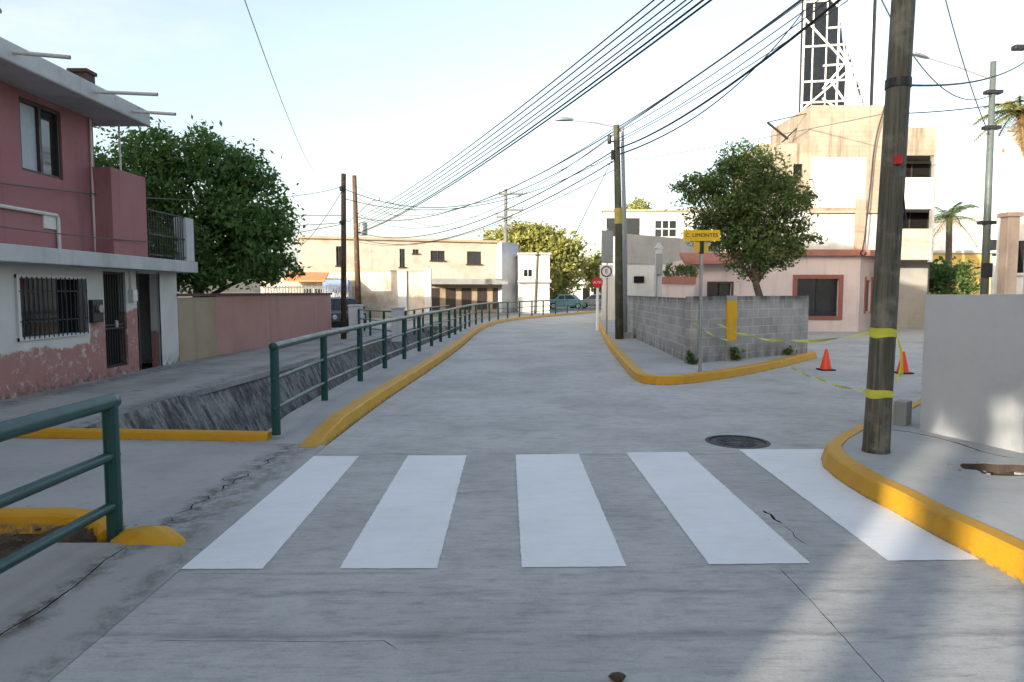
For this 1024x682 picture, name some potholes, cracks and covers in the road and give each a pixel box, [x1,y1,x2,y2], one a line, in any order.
crack [0,547,126,635]
crack [169,456,276,523]
crack [897,430,1012,458]
pothole [947,461,1024,476]
manhole cover [705,435,771,449]
